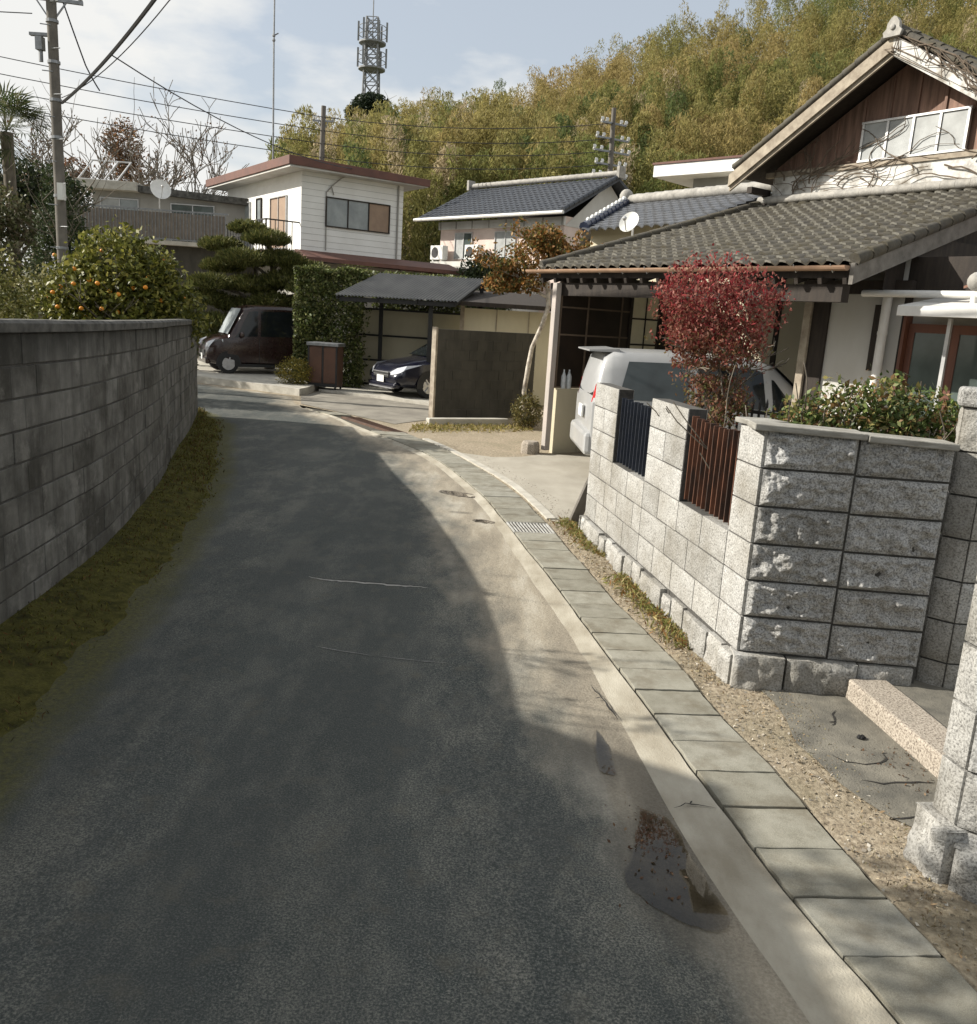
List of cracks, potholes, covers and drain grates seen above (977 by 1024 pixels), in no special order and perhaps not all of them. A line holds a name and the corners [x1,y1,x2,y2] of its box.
crack [591,685,618,719]
crack [318,646,444,663]
drain grate [506,521,556,534]
crack [309,576,426,588]
